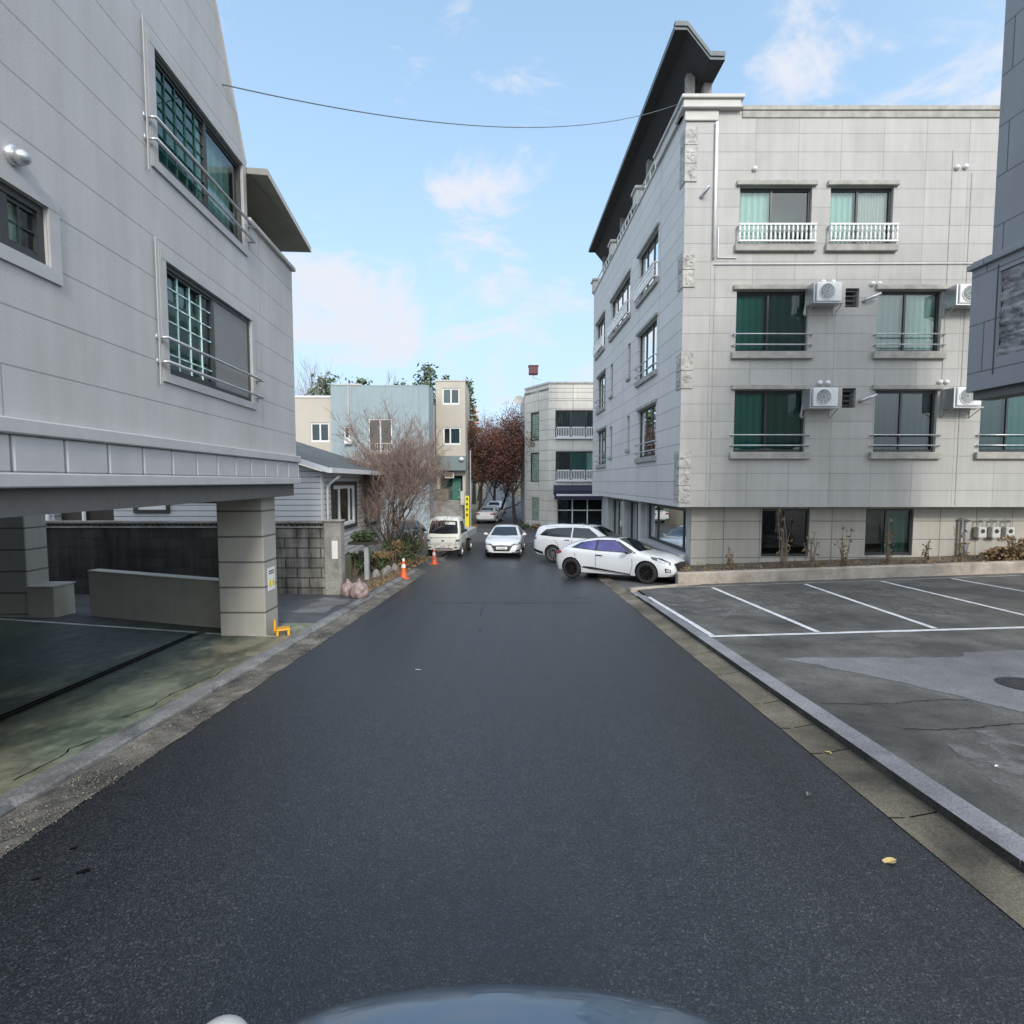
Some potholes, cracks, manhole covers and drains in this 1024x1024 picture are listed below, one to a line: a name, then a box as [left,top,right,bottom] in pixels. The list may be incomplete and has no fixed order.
crack [12,736,102,781]
manhole cover [995,677,1024,690]
